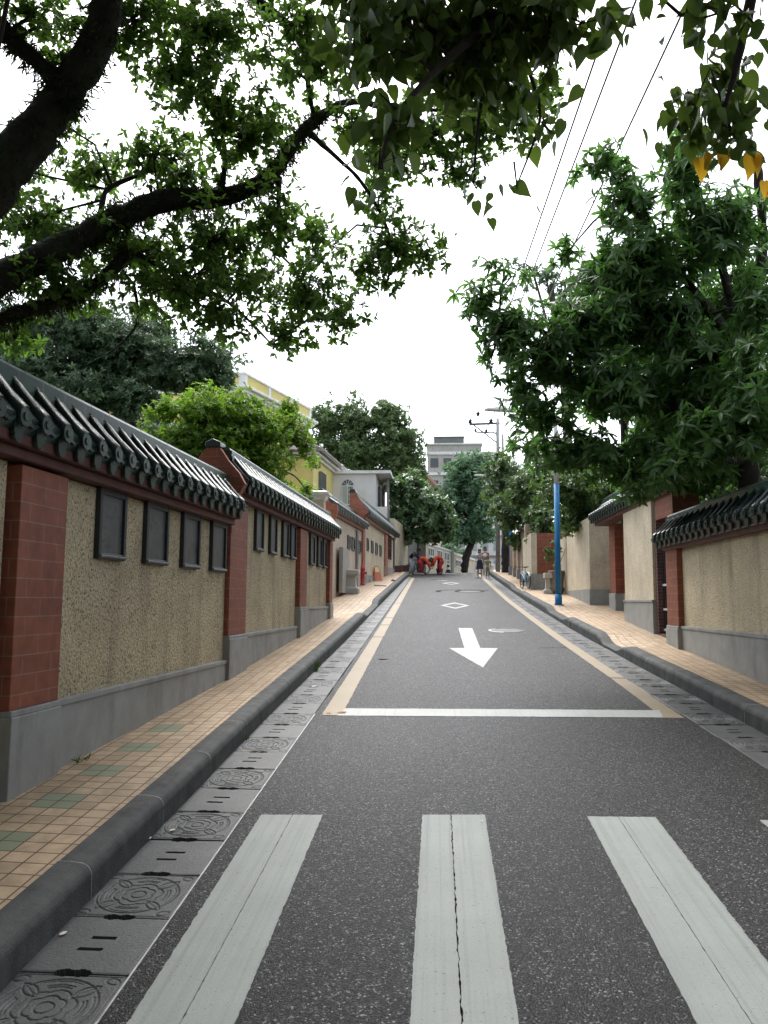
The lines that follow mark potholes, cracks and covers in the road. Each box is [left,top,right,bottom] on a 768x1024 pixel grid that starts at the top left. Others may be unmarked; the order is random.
crack [450,816,463,1024]
